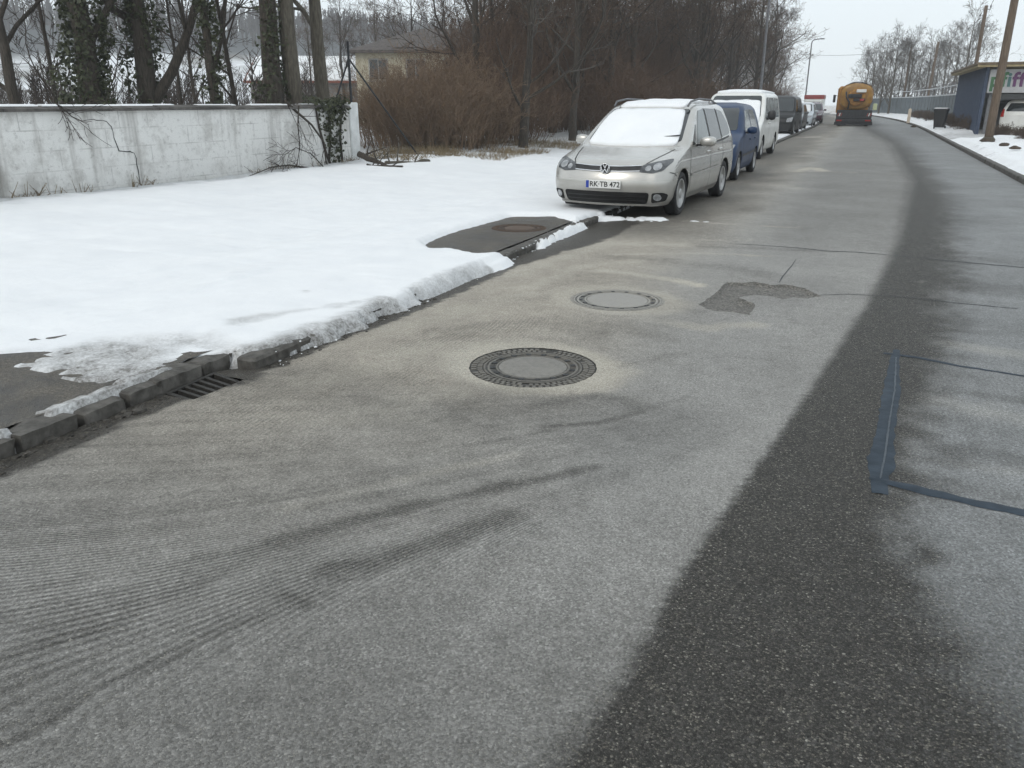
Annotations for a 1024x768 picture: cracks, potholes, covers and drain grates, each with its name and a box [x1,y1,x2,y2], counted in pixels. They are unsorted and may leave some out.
drain grate [165,372,239,399]
manhole cover [469,349,597,388]
crack [745,244,1016,282]
manhole cover [570,289,665,311]
manhole cover [491,224,547,241]
